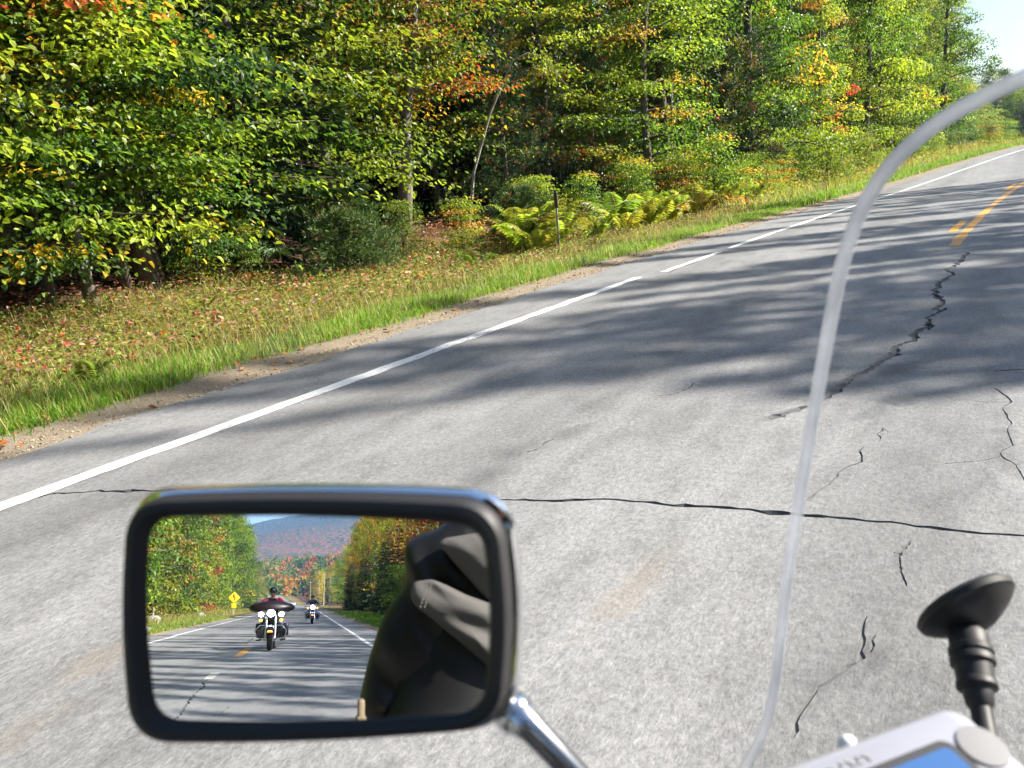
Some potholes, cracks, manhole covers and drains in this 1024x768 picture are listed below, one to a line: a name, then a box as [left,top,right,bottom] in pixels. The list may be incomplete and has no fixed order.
crack [34,428,1024,586]
crack [792,616,876,738]
crack [768,252,1024,480]
